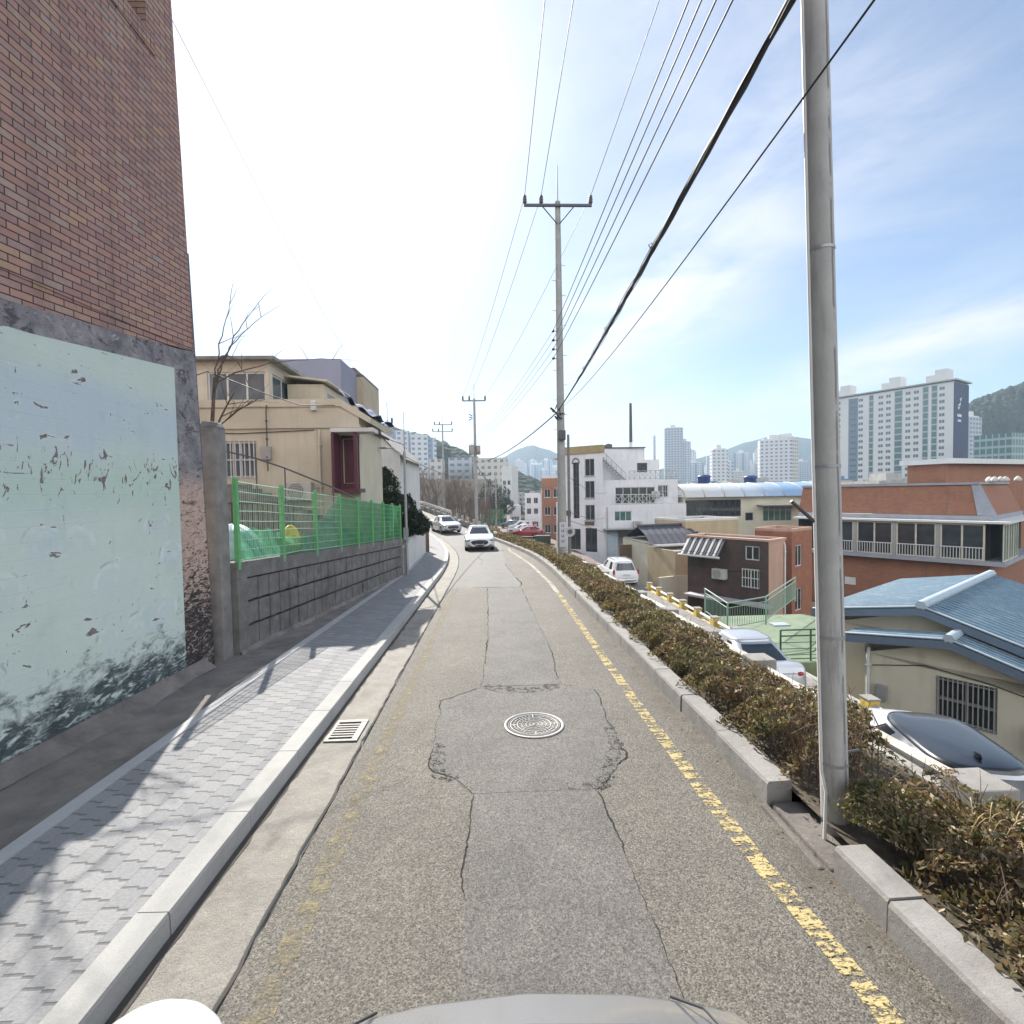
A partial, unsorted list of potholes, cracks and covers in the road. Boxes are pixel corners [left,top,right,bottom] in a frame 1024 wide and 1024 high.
manhole cover [504,712,564,739]
drain grate [323,719,369,742]
crack [428,563,685,1000]
